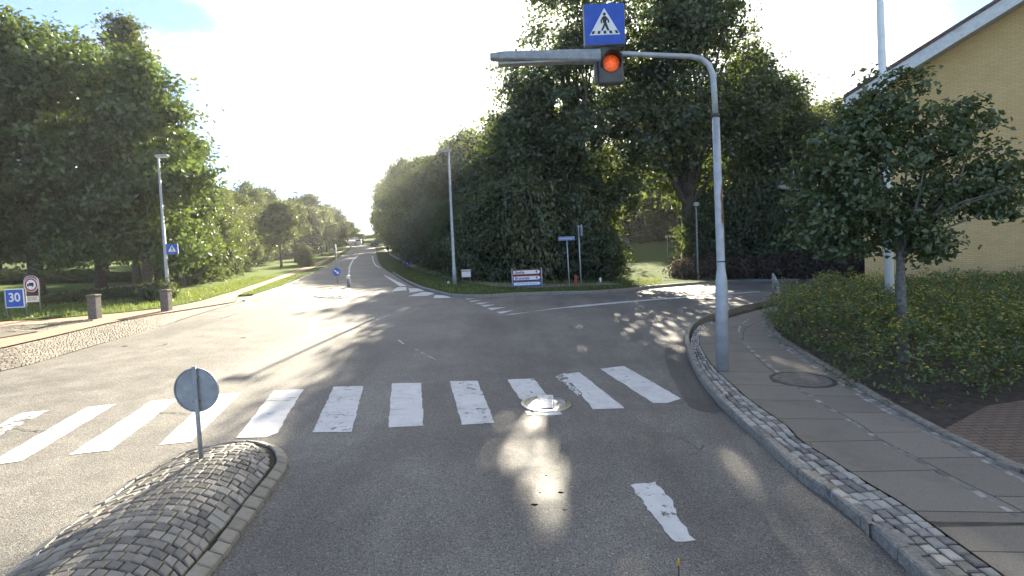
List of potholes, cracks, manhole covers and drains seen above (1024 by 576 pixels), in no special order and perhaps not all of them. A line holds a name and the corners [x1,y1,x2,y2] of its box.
manhole cover [769,372,838,388]
manhole cover [521,395,573,412]
